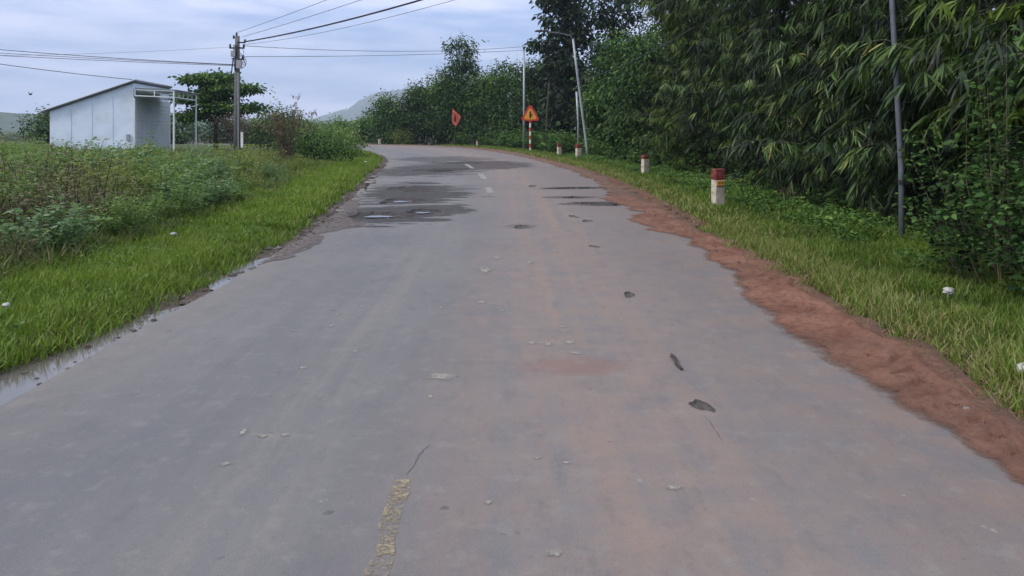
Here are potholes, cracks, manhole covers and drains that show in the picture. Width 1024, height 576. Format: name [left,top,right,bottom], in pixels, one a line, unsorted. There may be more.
pothole [345,212,416,220]
pothole [689,399,716,413]
